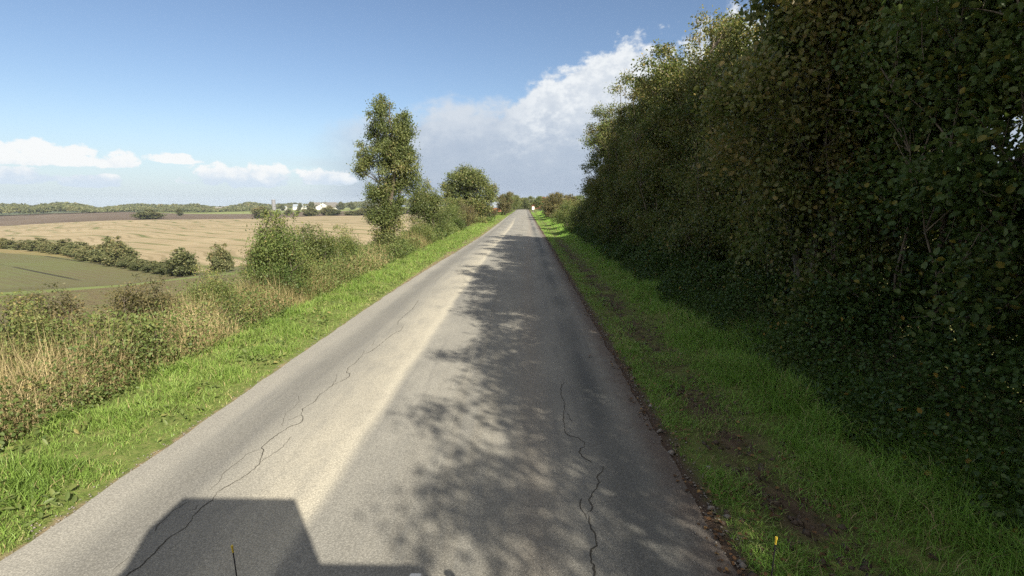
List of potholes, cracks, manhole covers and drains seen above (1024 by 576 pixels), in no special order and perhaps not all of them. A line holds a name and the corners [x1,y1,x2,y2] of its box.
crack [115,301,418,576]
crack [560,384,603,576]
